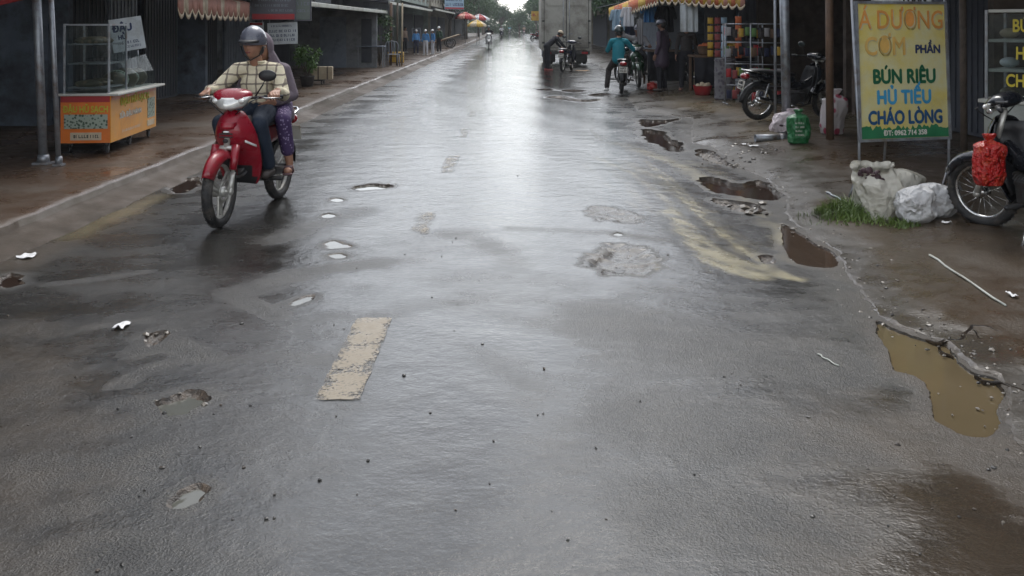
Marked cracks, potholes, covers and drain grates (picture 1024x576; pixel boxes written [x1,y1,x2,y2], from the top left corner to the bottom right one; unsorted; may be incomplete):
pothole [585,206,642,223]
pothole [154,389,212,416]
pothole [710,198,766,213]
pothole [696,176,786,201]
pothole [322,240,353,249]
pothole [289,294,316,306]
pothole [640,129,685,153]
pothole [777,223,839,268]
pothole [581,243,663,276]
pothole [166,483,211,509]
pothole [165,176,202,194]
pothole [142,330,170,346]
